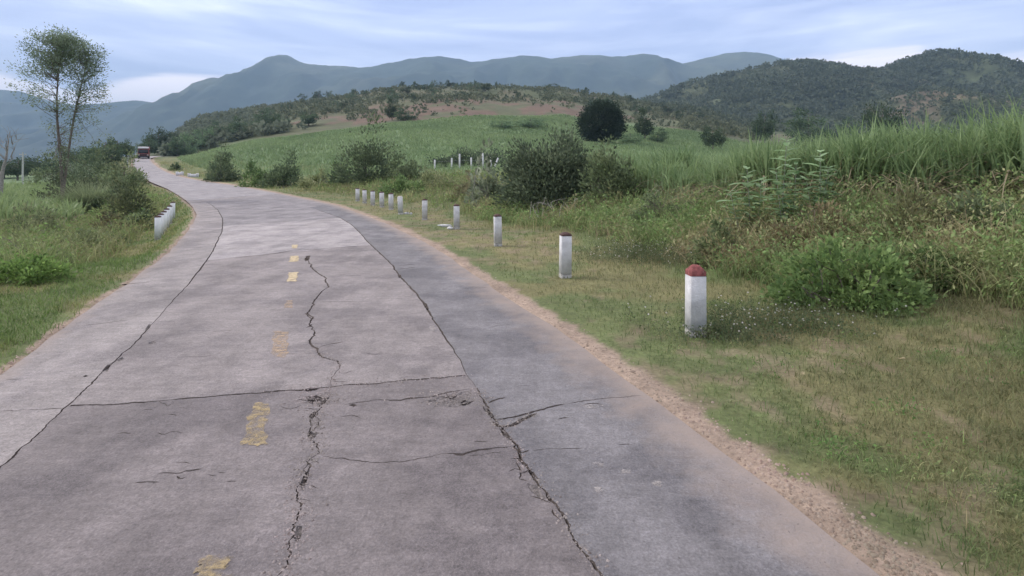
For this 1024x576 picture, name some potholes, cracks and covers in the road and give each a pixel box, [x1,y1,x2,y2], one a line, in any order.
crack [277,257,640,576]
crack [136,462,233,483]
